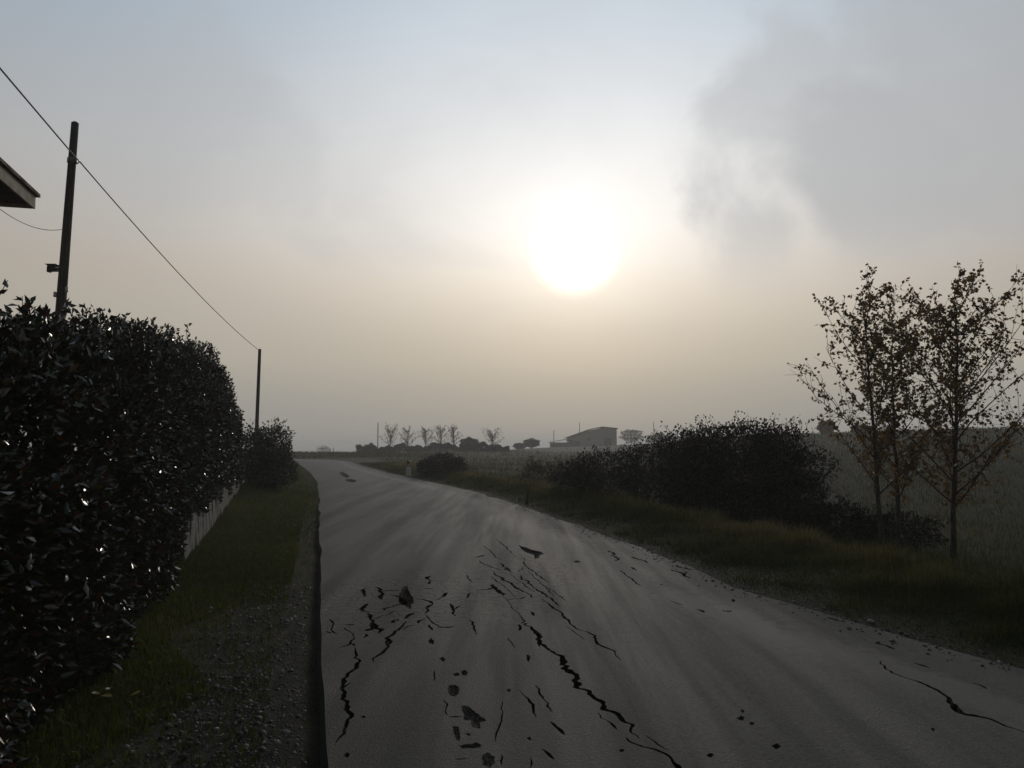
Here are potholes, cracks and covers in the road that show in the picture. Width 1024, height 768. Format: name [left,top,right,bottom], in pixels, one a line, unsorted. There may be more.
pothole [482,752,495,768]
crack [880,644,1024,732]
pothole [519,545,544,559]
pothole [398,586,414,609]
pothole [447,685,459,697]
crack [326,539,682,768]
crack [608,551,705,612]
pothole [461,705,486,729]
